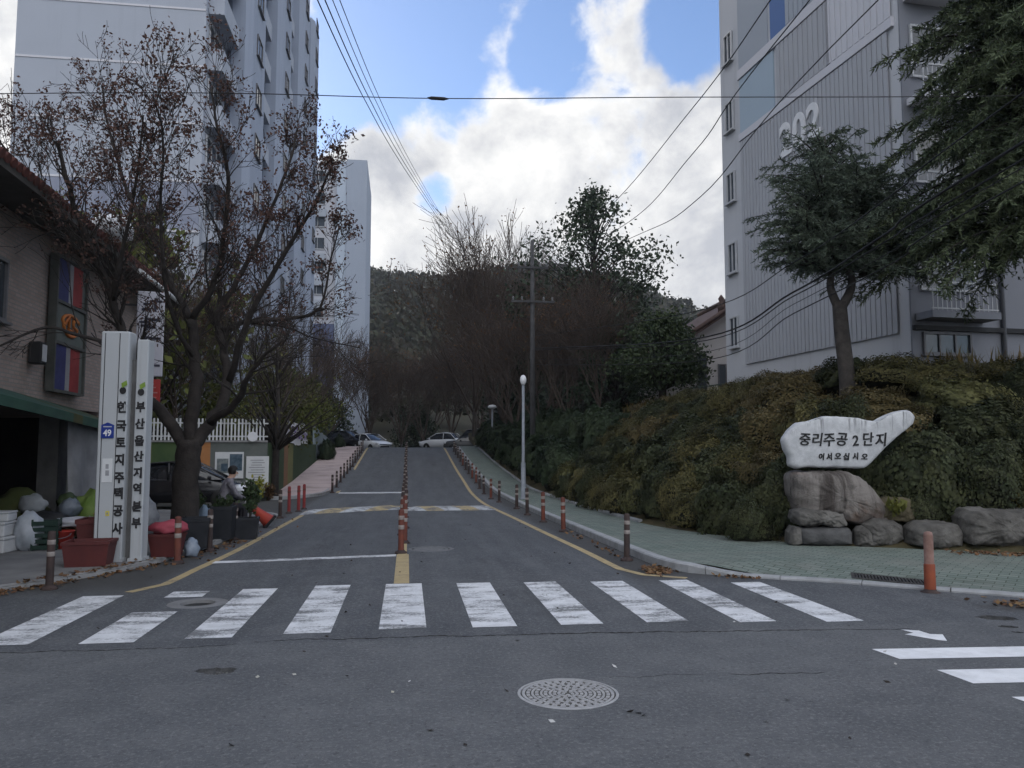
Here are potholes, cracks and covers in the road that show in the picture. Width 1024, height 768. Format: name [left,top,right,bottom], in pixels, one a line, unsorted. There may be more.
manhole cover [166,598,229,609]
manhole cover [517,678,619,710]
